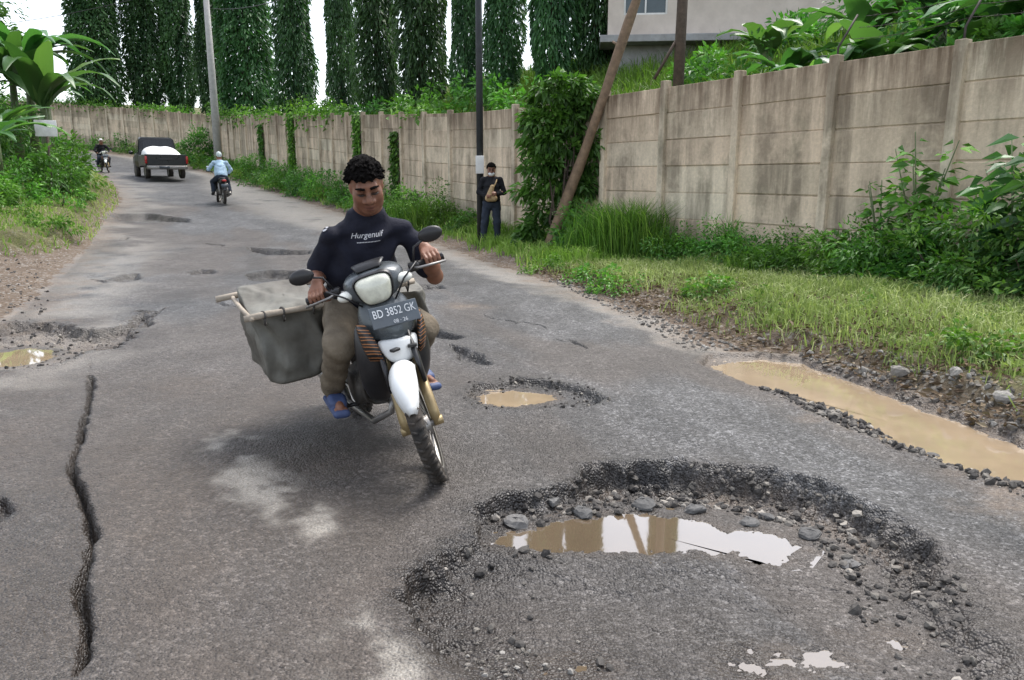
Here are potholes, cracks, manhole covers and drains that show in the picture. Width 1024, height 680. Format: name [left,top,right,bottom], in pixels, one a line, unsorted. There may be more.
pothole [0,493,22,522]
pothole [110,213,194,223]
crack [61,375,106,679]
pothole [376,453,1024,680]
crack [482,314,588,349]
pothole [0,309,159,373]
pothole [457,375,615,411]
pothole [245,247,313,256]
pothole [692,351,1024,491]
pothole [240,269,297,282]
pothole [436,327,470,342]
pothole [103,273,145,283]
